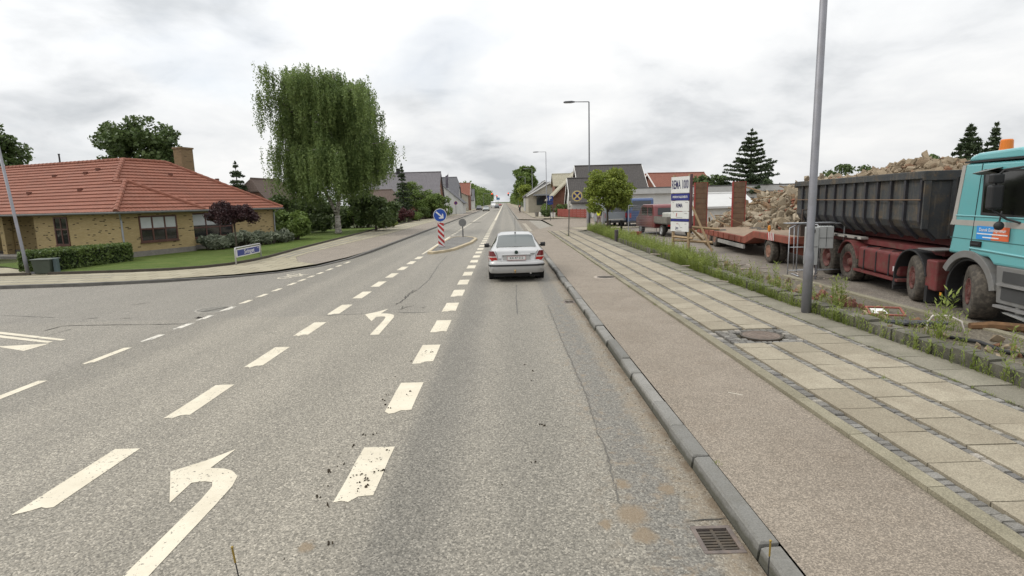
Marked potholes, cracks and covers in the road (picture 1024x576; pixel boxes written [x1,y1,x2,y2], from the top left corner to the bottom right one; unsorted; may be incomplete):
manhole cover [740,330,783,342]
crack [548,299,621,504]
drain grate [690,525,747,554]
